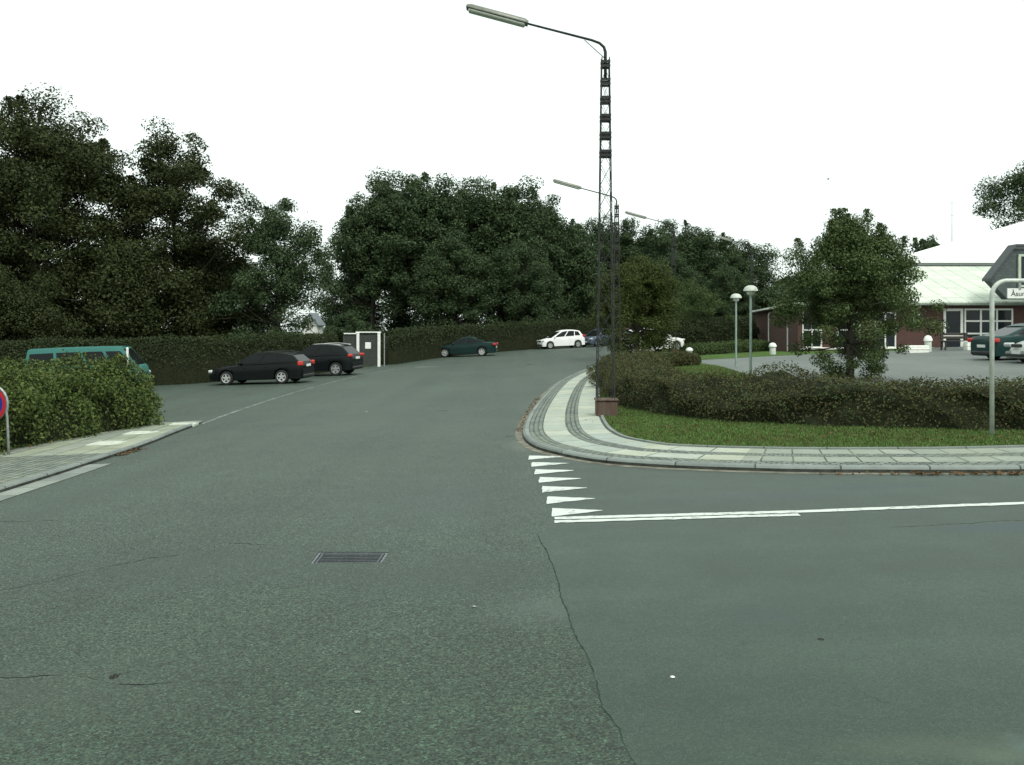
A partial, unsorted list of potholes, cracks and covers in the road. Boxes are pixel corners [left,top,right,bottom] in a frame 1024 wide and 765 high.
crack [0,543,261,591]
drain grate [311,552,388,563]
crack [0,660,416,685]
